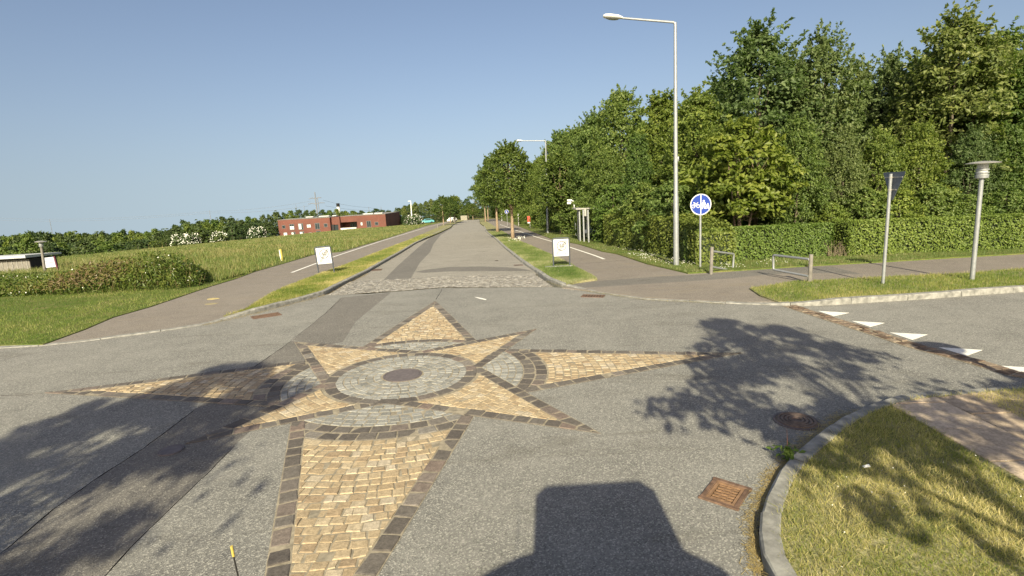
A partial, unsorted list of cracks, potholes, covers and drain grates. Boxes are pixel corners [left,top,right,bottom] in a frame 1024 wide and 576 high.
manhole cover [773,412,821,431]
drain grate [698,477,752,511]
